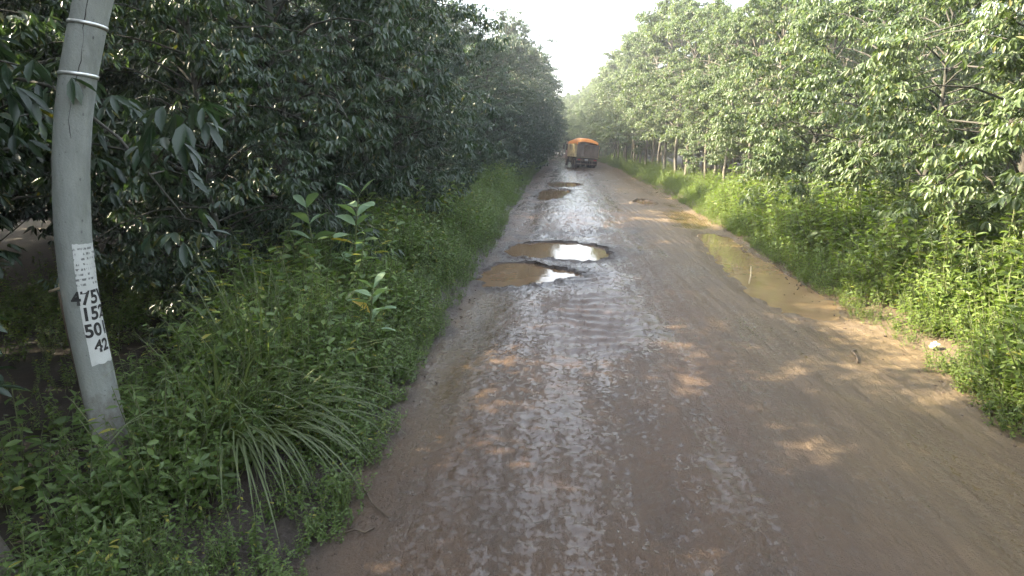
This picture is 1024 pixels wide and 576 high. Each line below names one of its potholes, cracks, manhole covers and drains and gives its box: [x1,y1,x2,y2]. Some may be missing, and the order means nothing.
pothole [629,198,658,206]
pothole [469,260,591,291]
pothole [533,188,573,201]
pothole [498,240,618,263]
pothole [694,233,855,325]
